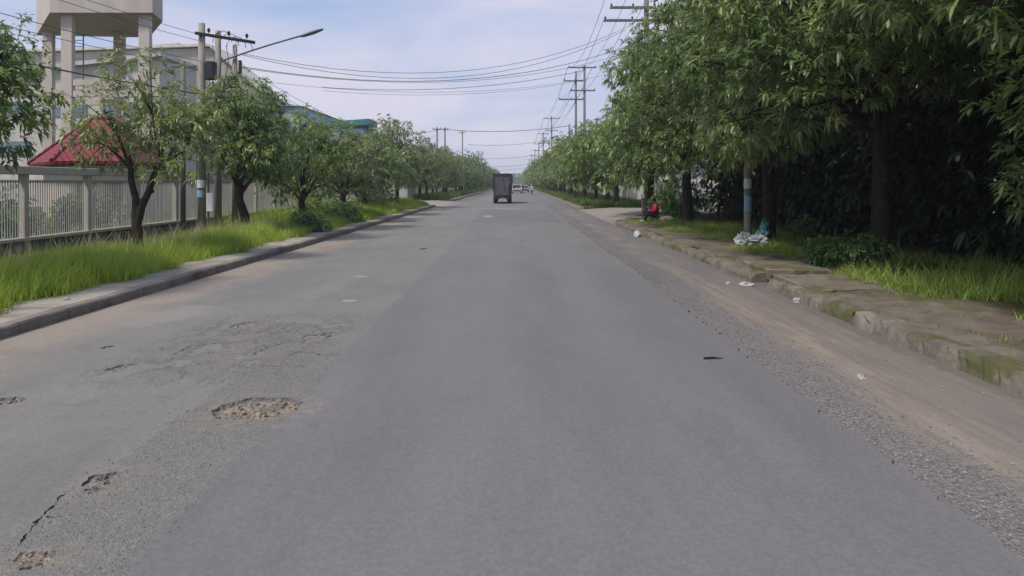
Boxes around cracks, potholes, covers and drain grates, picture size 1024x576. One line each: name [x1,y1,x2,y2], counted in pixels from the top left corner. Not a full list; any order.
pothole [81,472,120,494]
crack [17,491,68,546]
crack [174,330,339,367]
pothole [0,396,25,406]
pothole [211,397,303,420]
pothole [13,551,53,572]
